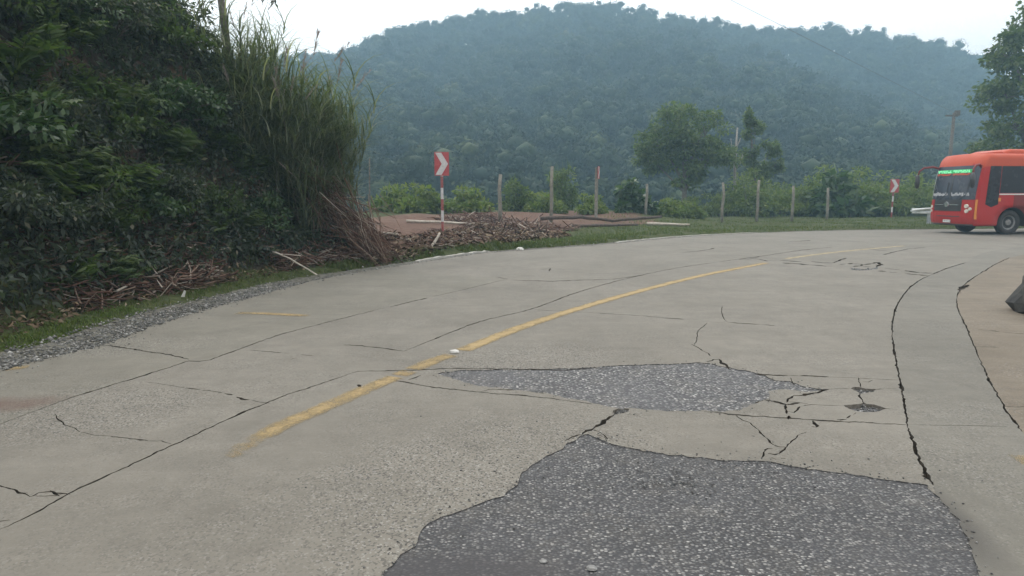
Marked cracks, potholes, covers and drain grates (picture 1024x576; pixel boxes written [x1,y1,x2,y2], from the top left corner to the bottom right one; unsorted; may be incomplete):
crack [715,373,974,459]
crack [693,307,774,370]
pothole [844,403,886,412]
crack [352,240,928,351]
crack [0,281,614,529]
